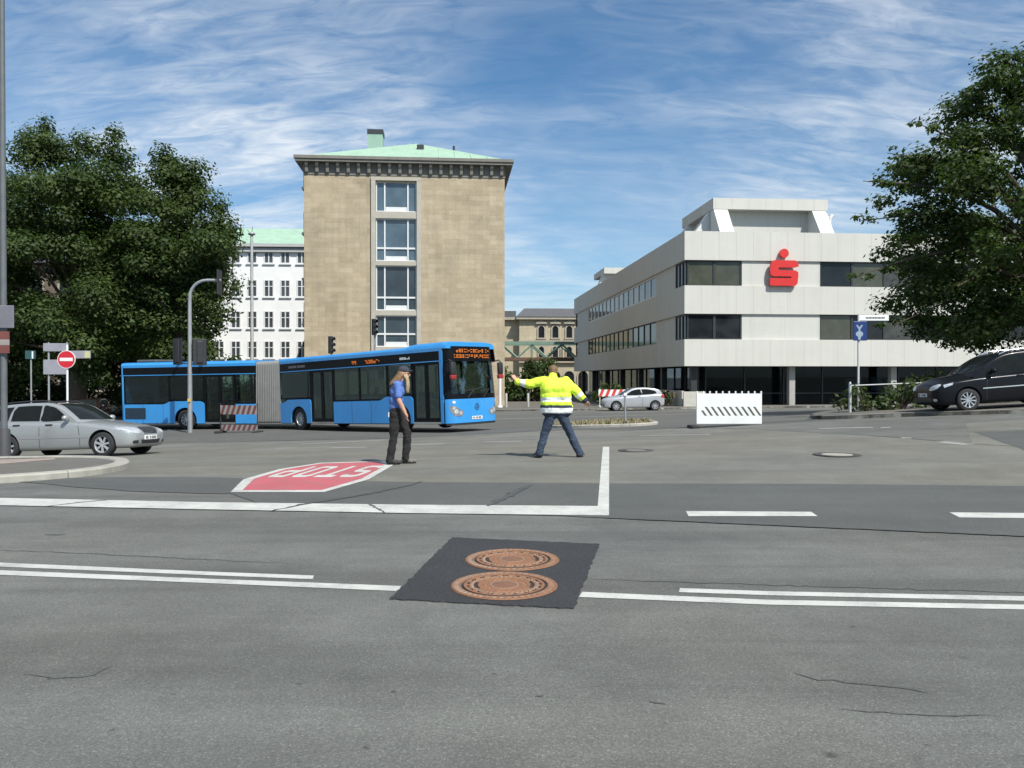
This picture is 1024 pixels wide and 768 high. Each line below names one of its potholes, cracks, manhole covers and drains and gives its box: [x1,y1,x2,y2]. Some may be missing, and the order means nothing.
manhole cover [451,571,558,600]
crack [29,667,109,680]
manhole cover [465,549,559,571]
crack [796,673,927,693]
